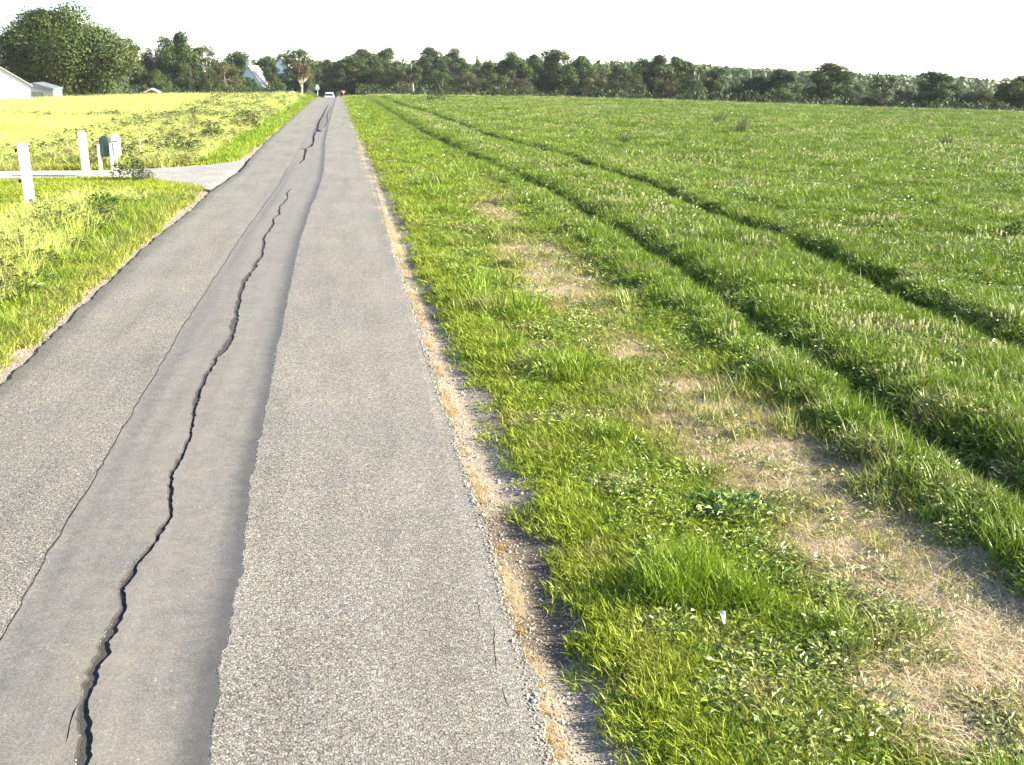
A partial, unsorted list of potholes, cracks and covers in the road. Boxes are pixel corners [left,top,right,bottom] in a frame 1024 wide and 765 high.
crack [65,189,291,765]
crack [299,104,331,164]
crack [477,592,509,708]
